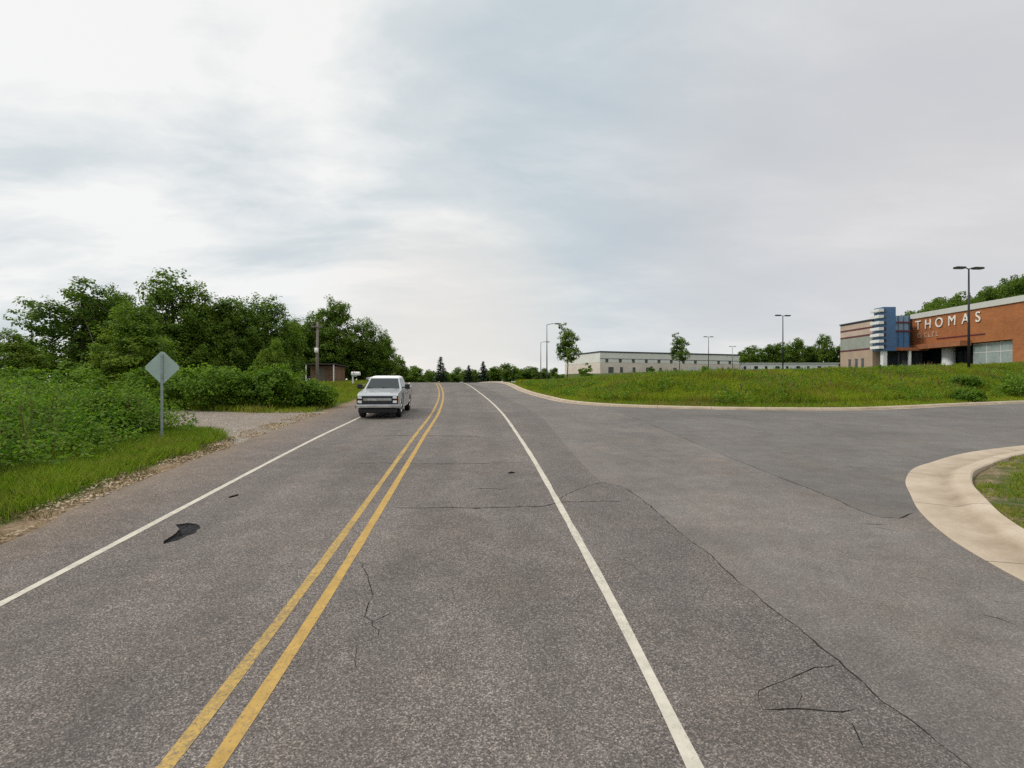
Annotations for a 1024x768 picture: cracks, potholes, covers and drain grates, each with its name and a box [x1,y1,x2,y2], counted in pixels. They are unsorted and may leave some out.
pothole [163,523,200,544]
crack [624,414,912,530]
crack [355,563,392,670]
crack [396,482,971,768]
